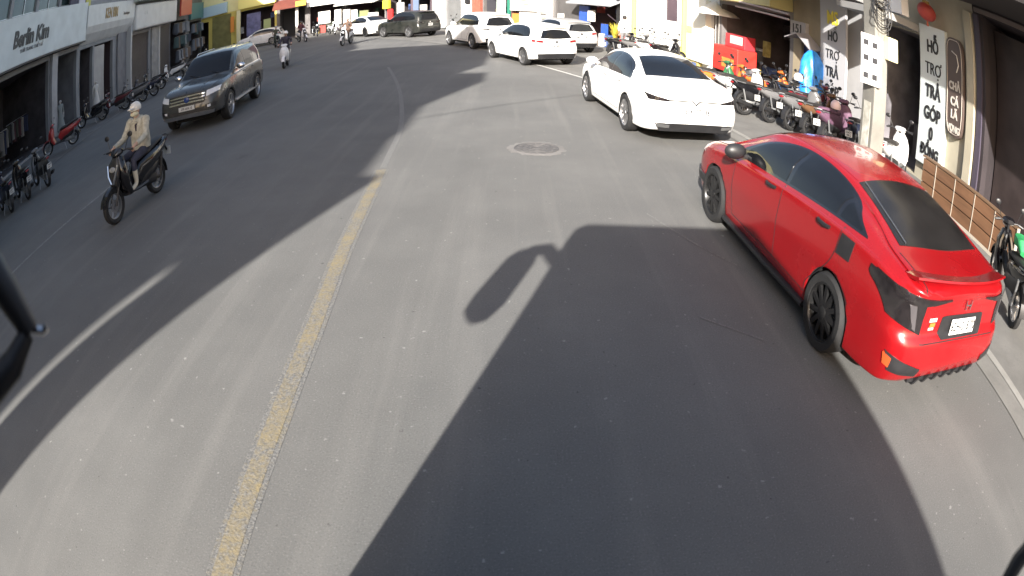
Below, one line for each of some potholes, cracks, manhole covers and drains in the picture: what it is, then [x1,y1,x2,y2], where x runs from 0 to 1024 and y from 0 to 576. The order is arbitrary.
manhole cover [507,141,567,156]
